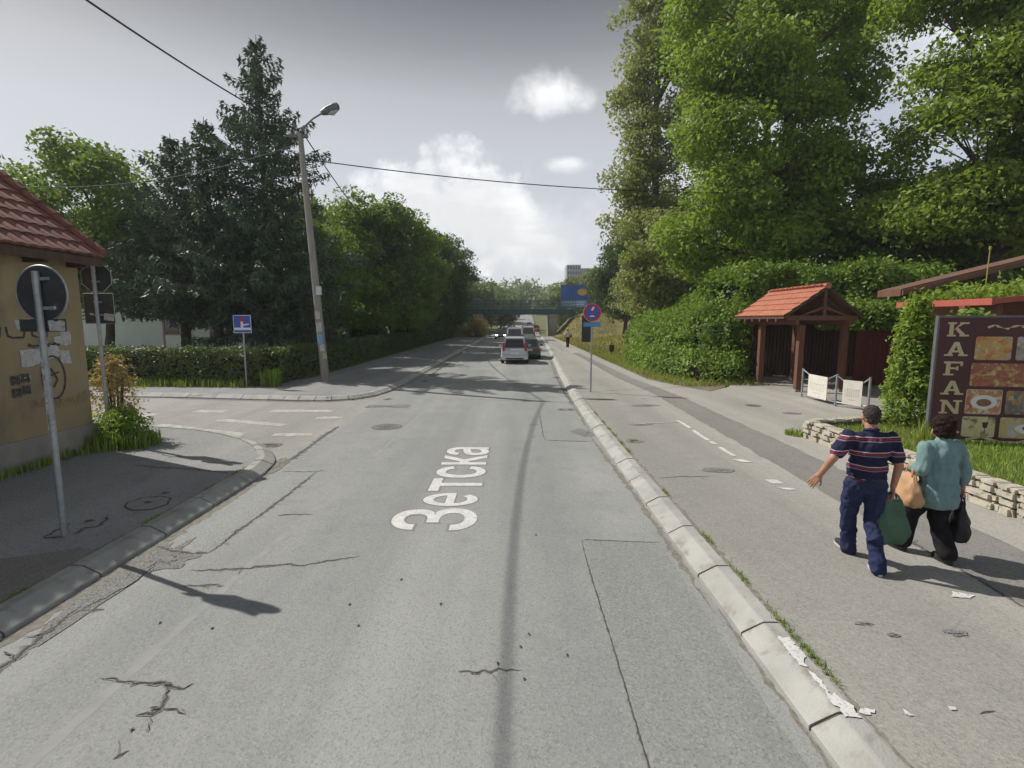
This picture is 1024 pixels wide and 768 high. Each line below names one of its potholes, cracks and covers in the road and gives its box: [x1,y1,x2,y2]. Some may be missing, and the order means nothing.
utility cover [124,496,172,510]
crack [148,426,358,590]
crack [458,667,522,682]
crack [101,677,193,759]
